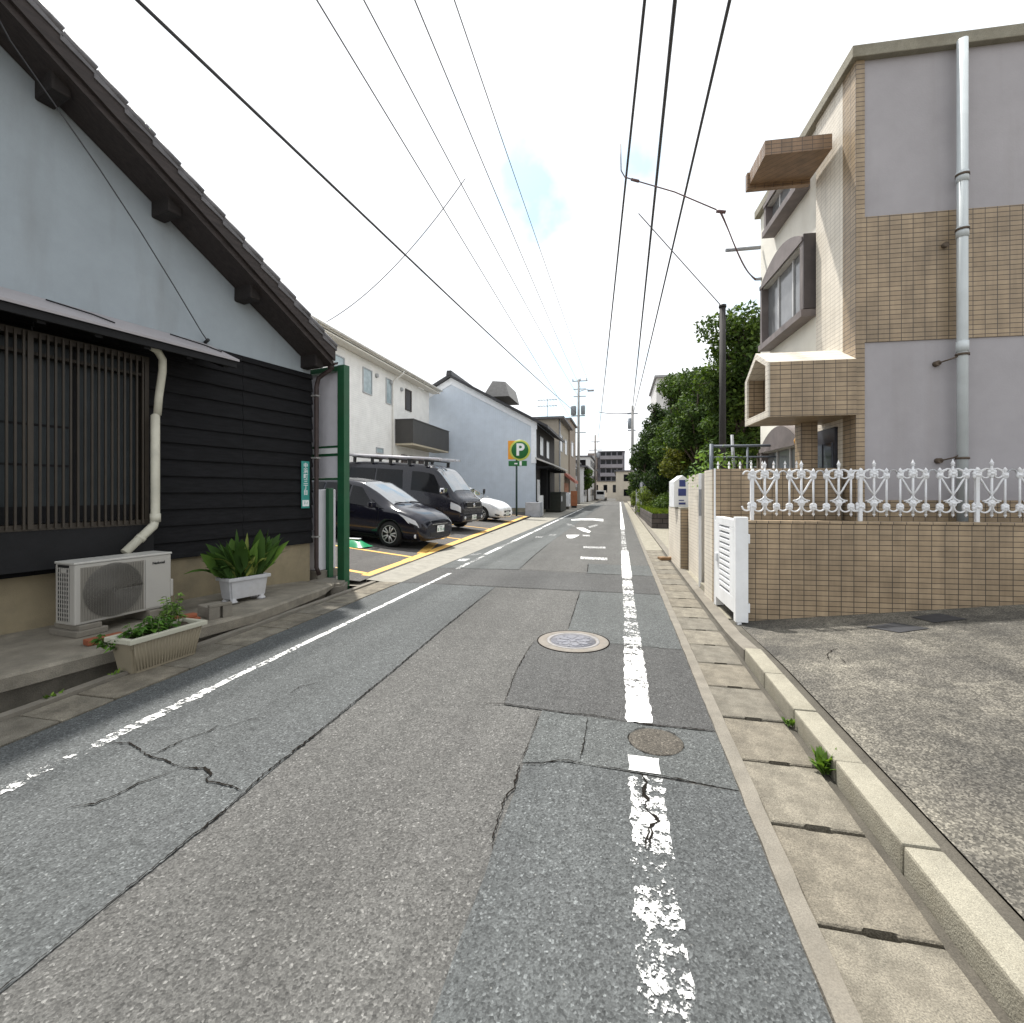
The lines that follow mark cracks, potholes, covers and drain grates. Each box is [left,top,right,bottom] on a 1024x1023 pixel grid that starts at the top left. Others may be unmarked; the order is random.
manhole cover [537,630,610,653]
manhole cover [627,727,684,756]
crack [492,703,728,850]
utility cover [913,613,965,622]
utility cover [867,623,928,632]
crack [67,717,261,808]
